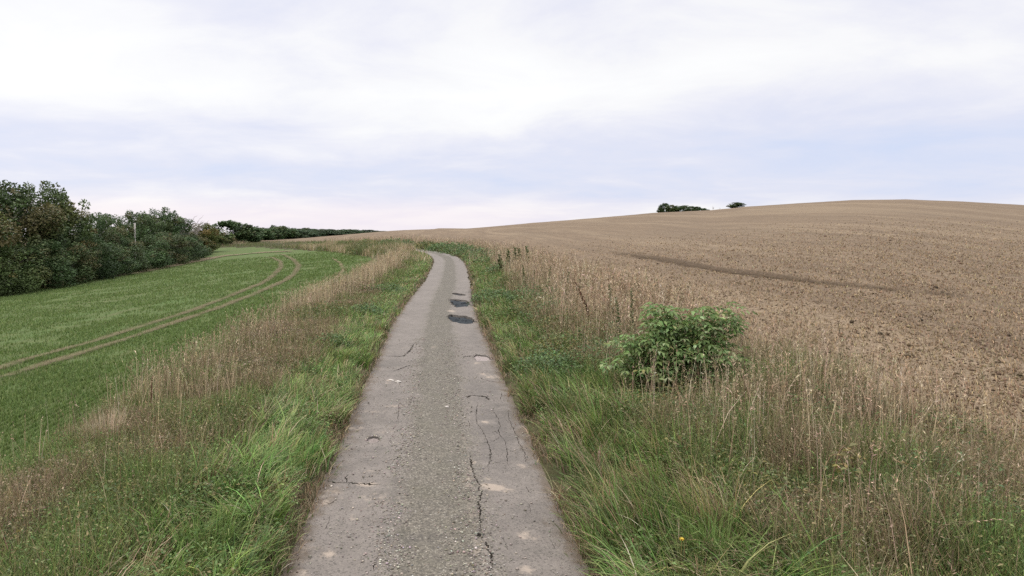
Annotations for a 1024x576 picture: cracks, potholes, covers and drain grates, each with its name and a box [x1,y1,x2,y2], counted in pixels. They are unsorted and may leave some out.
pothole [446,314,477,324]
crack [457,376,529,569]
pothole [448,299,471,307]
crack [328,460,384,506]
